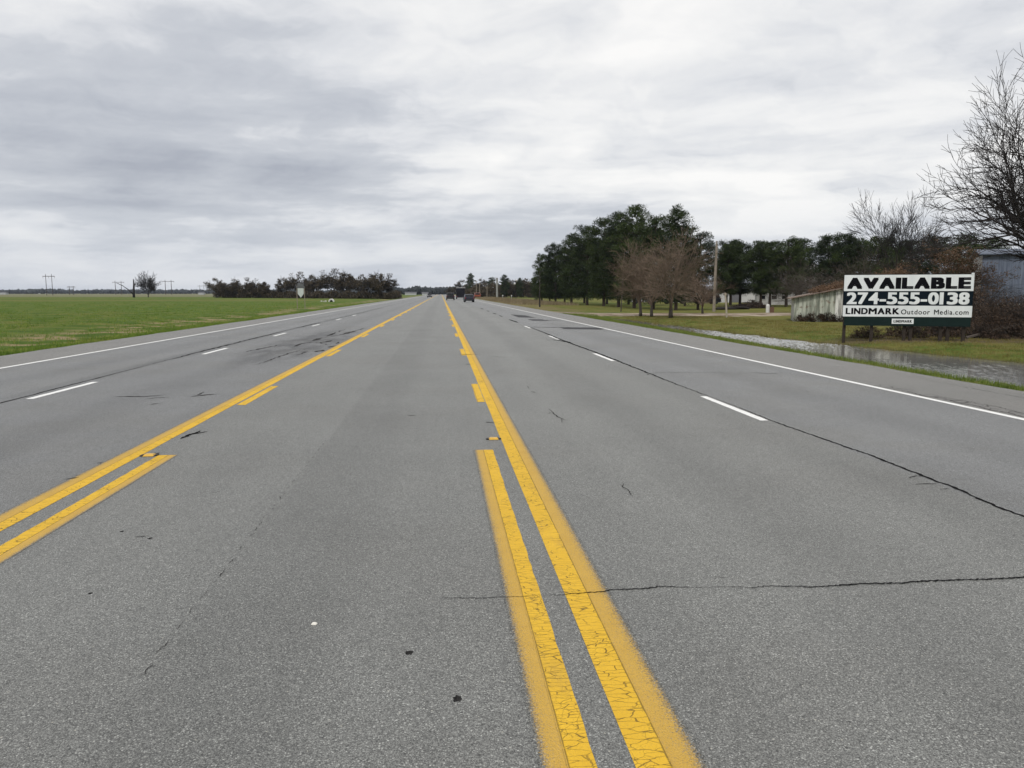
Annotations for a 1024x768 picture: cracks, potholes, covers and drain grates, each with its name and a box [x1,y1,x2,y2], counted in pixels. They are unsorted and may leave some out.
crack [247,328,363,364]
crack [432,576,1024,598]
crack [145,450,319,673]
